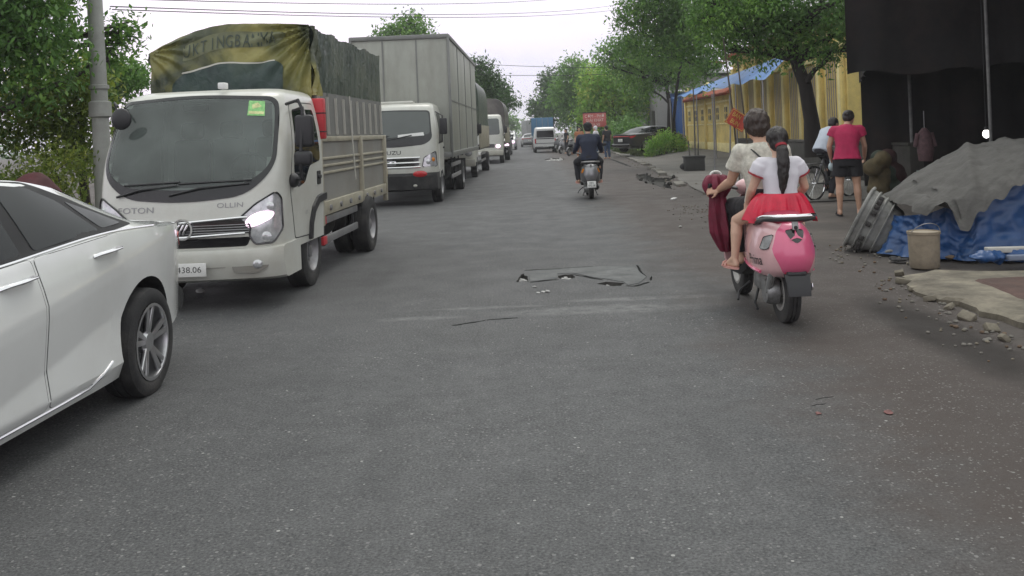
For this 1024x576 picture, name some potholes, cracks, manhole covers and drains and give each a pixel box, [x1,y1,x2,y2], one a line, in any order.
crack [452,318,512,326]
pothole [636,173,675,189]
